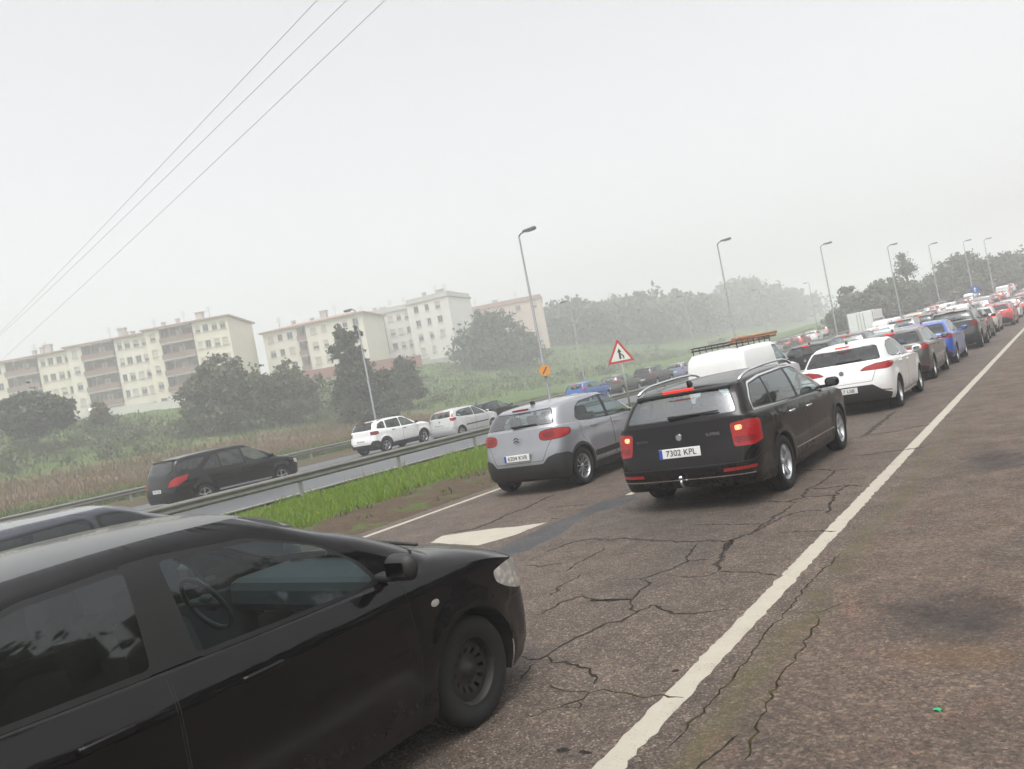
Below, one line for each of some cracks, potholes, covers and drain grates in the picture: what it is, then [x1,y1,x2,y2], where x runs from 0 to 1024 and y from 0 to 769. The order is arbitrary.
crack [520,411,926,769]
